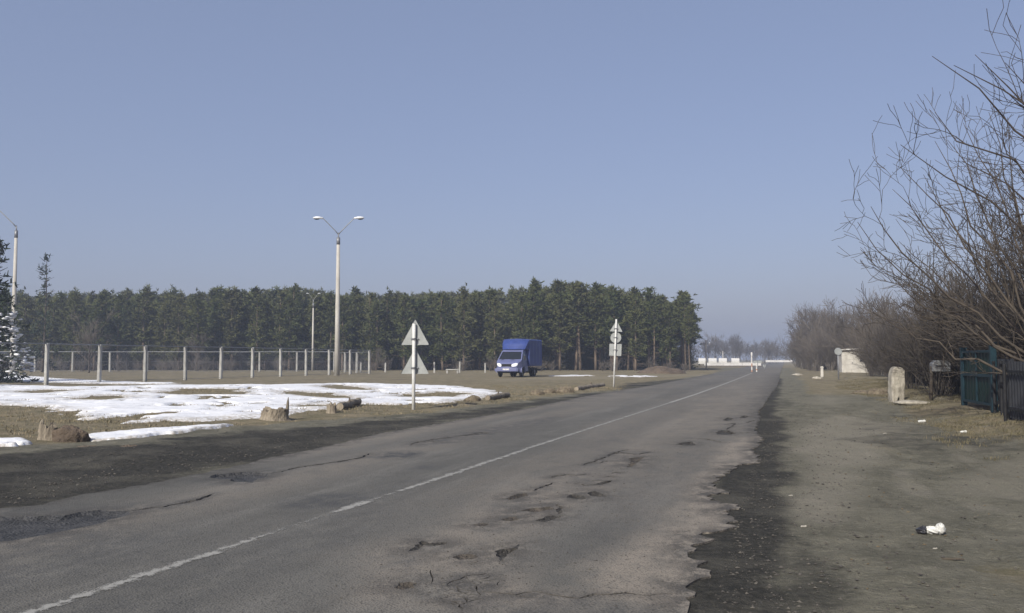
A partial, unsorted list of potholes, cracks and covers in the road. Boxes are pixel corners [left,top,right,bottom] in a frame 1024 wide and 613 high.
crack [411,432,489,445]
crack [133,494,212,511]
pothole [409,541,447,551]
crack [526,450,649,514]
pothole [209,472,268,483]
pothole [495,544,519,561]
crack [274,454,369,473]
crack [430,570,675,609]
